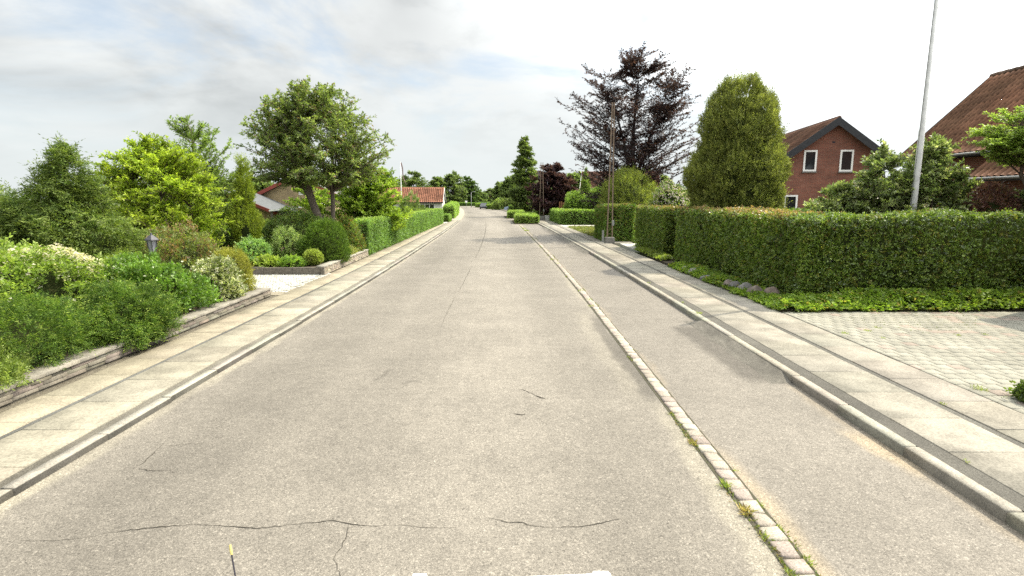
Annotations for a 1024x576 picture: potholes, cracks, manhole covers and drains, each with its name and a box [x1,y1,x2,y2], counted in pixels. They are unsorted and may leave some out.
crack [23,520,455,576]
crack [493,518,626,528]
